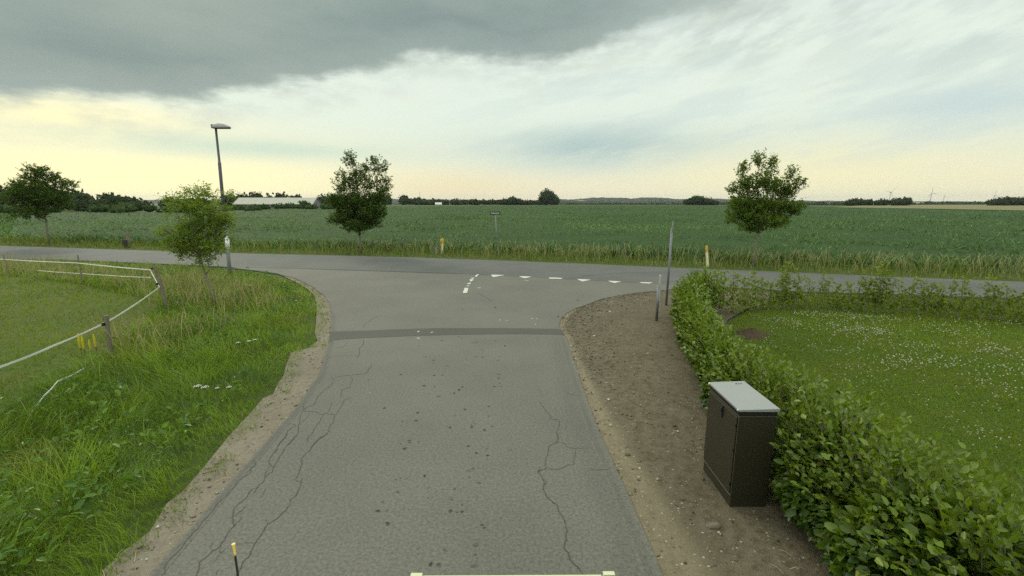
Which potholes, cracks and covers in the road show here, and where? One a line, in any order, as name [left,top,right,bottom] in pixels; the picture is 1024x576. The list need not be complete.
crack [537,391,583,574]
crack [164,339,372,576]
